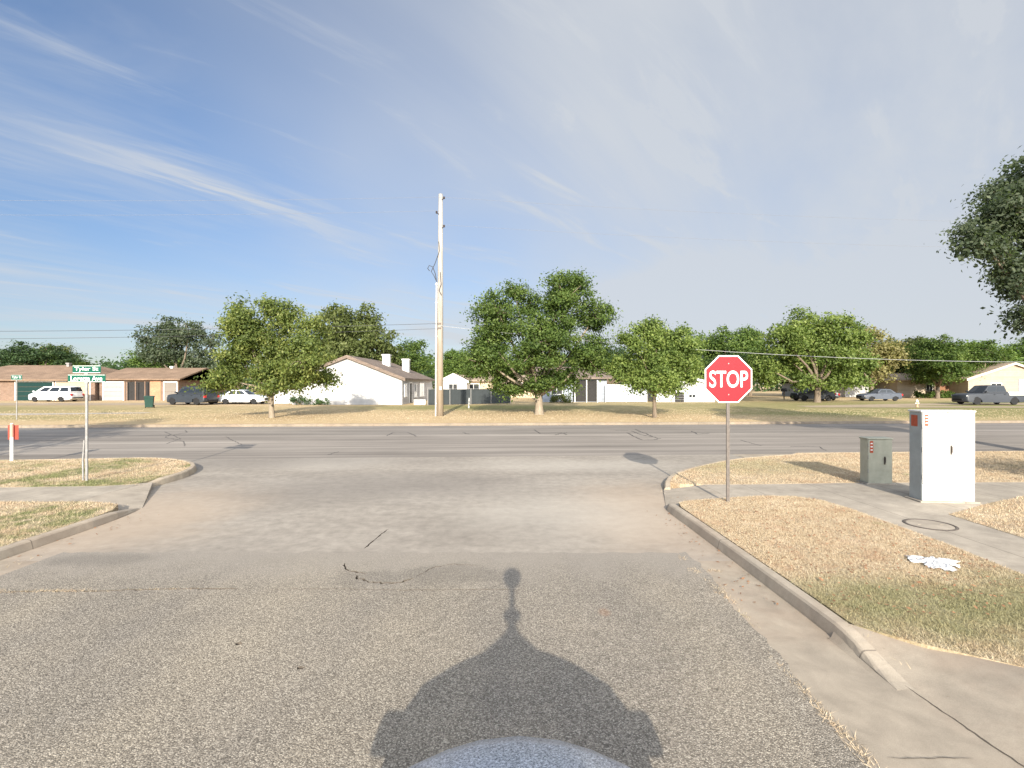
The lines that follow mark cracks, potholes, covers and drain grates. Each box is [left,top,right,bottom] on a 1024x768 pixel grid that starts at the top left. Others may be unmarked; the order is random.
crack [1,529,506,593]
manhole cover [902,519,959,531]
